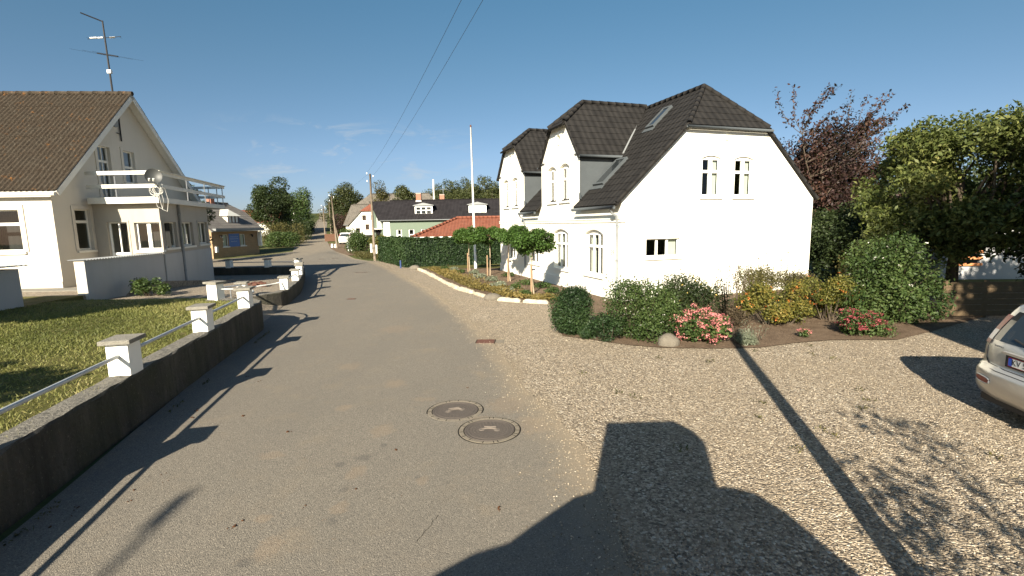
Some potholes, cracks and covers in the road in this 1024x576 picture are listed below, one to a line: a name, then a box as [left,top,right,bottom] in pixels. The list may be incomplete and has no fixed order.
manhole cover [426,400,484,421]
manhole cover [458,417,521,444]
